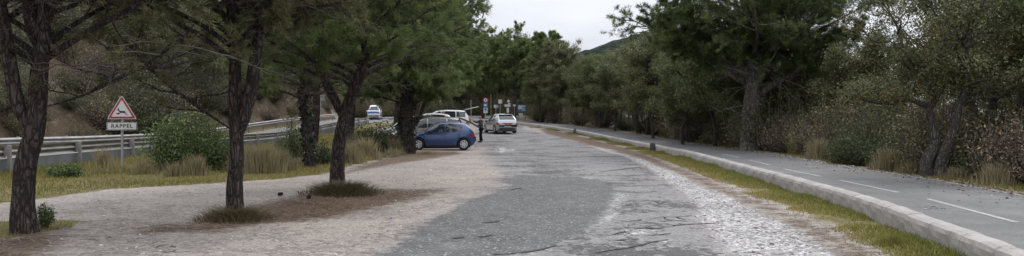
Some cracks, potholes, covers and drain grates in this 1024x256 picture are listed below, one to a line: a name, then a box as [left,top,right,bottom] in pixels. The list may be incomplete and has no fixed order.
crack [595,201,708,253]
